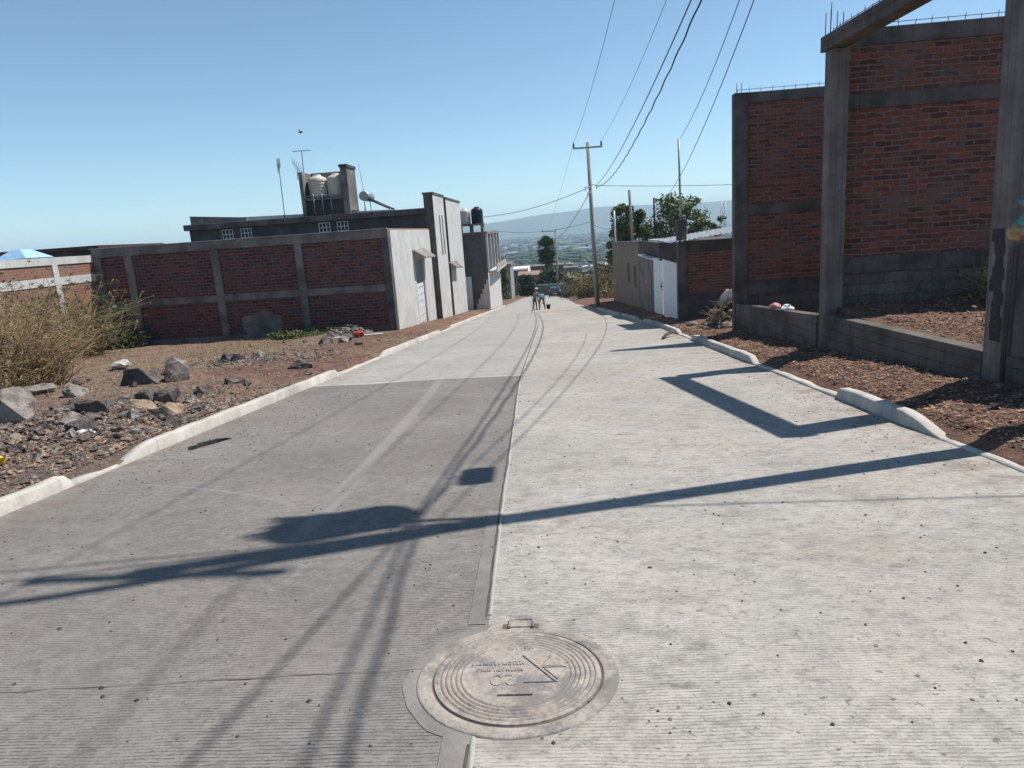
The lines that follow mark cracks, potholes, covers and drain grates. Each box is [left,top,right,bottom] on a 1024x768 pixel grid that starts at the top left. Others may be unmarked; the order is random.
manhole cover [417,614,619,740]
